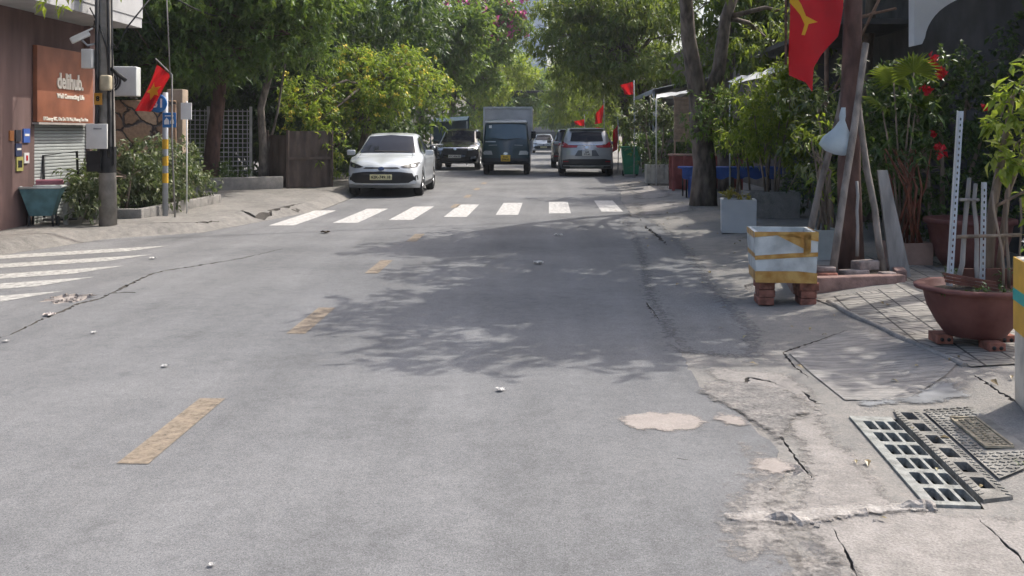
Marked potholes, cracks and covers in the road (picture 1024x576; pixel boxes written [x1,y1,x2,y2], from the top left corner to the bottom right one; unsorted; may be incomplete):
crack [732,499,938,576]
crack [0,249,280,338]
drain grate [849,409,1013,509]
crack [780,437,813,480]
pothole [40,293,96,304]
crack [980,521,1024,563]
